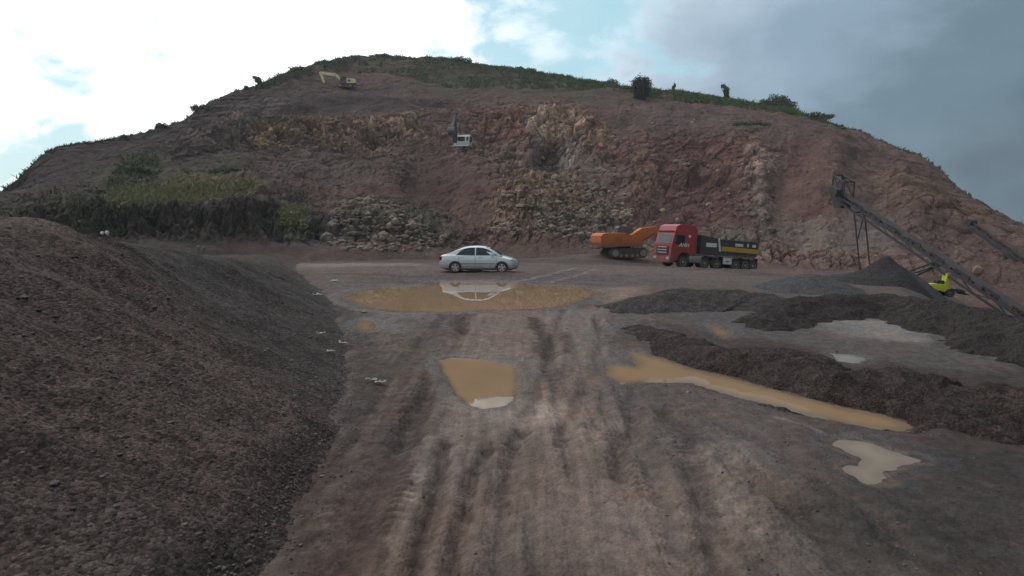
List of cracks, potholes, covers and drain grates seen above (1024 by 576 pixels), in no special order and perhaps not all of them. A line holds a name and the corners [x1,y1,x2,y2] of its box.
pothole [426,353,532,414]
pothole [807,429,954,493]
